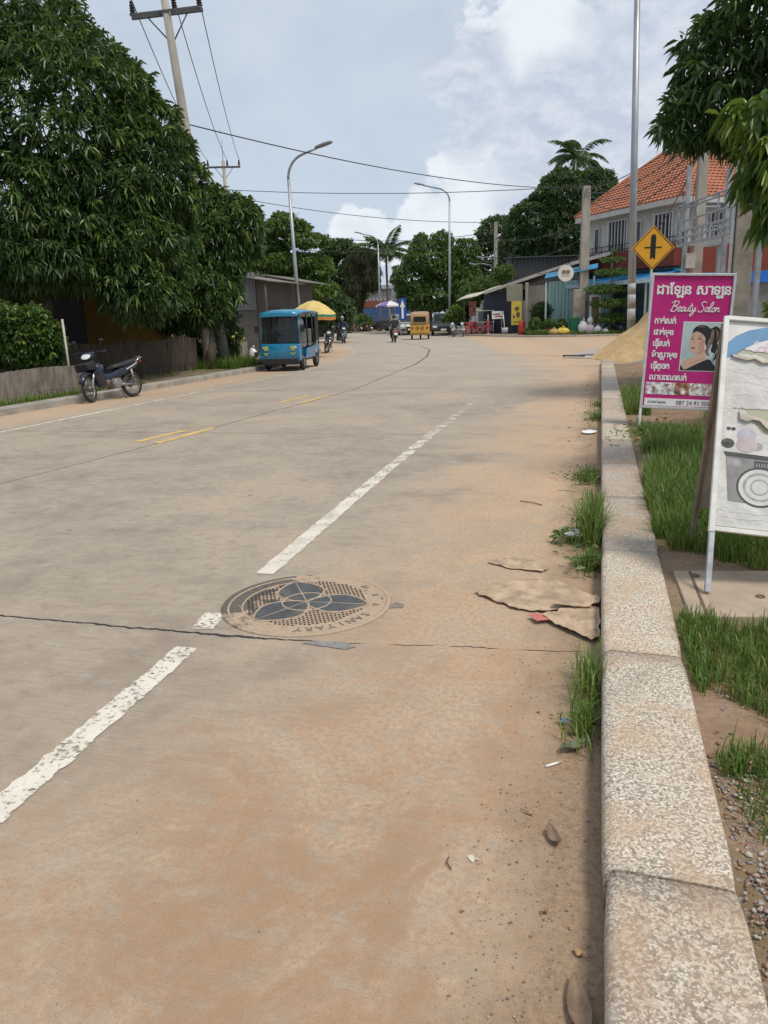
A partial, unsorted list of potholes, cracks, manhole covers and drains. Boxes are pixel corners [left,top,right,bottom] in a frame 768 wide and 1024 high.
manhole cover [221,575,391,637]
